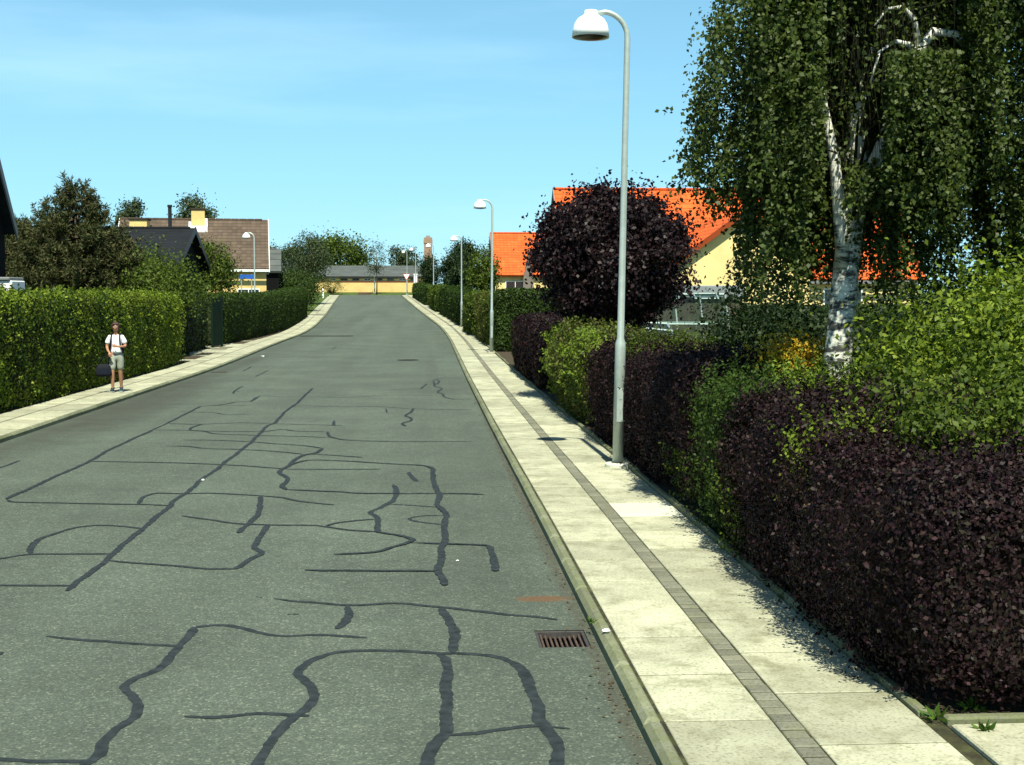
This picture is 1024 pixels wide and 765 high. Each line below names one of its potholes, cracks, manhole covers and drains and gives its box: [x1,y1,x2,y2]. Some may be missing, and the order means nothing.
crack [395,378,452,399]
drain grate [534,630,591,648]
